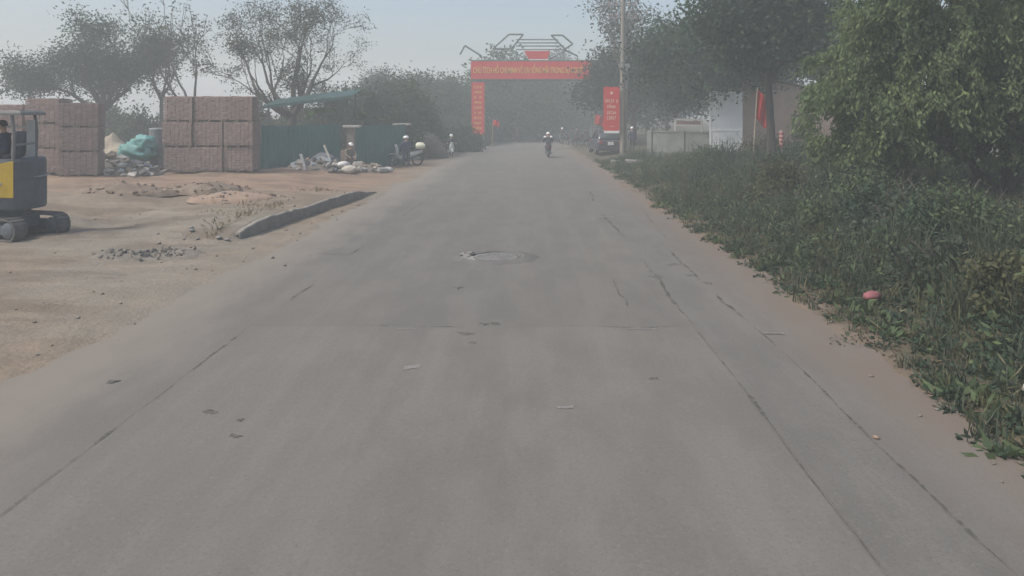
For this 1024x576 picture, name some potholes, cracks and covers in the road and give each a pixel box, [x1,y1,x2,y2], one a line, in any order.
manhole cover [452,250,540,265]
